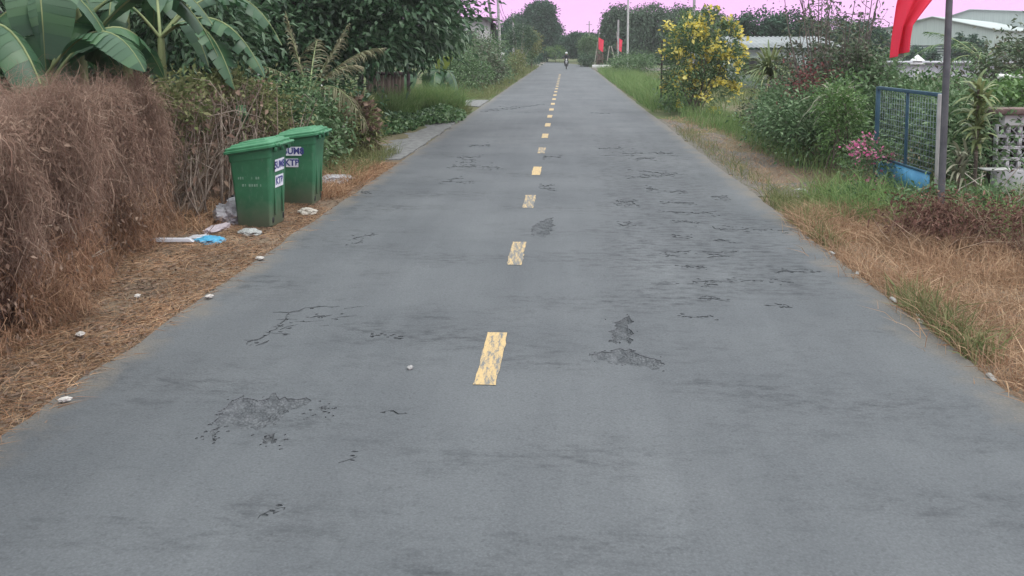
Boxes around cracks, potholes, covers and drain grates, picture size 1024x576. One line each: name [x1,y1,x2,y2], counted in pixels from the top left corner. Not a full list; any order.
crack [246,306,359,346]
pothole [195,393,337,450]
pothole [531,217,555,237]
crack [442,142,500,184]
pothole [589,314,665,372]
crack [597,147,821,320]
crack [257,504,285,519]
